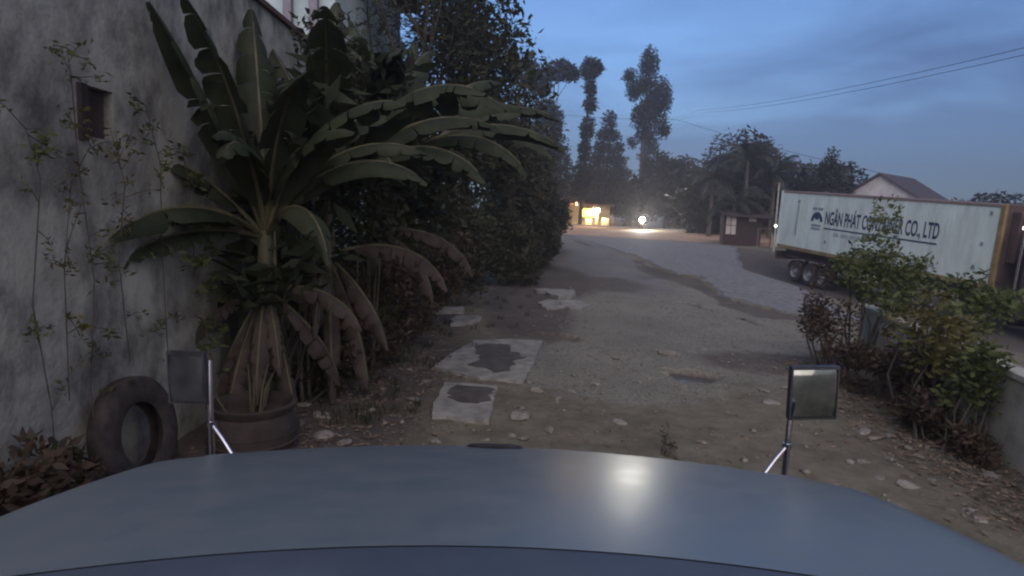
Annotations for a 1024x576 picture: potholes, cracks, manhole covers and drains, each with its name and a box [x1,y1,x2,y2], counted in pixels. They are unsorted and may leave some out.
pothole [631,361,755,391]
